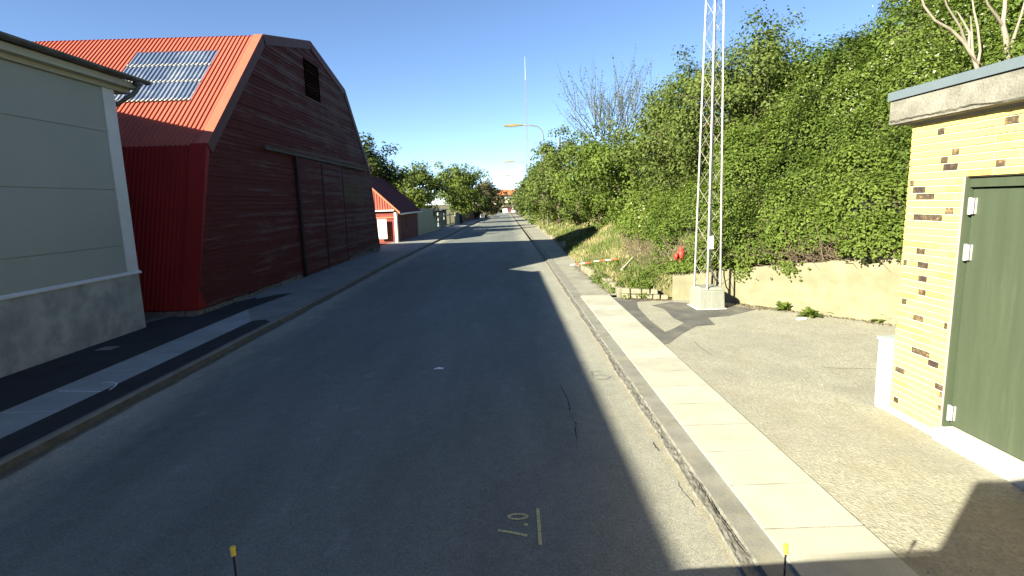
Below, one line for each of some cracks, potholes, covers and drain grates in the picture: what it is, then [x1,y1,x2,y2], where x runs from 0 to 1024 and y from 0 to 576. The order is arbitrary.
crack [678,480,749,556]
